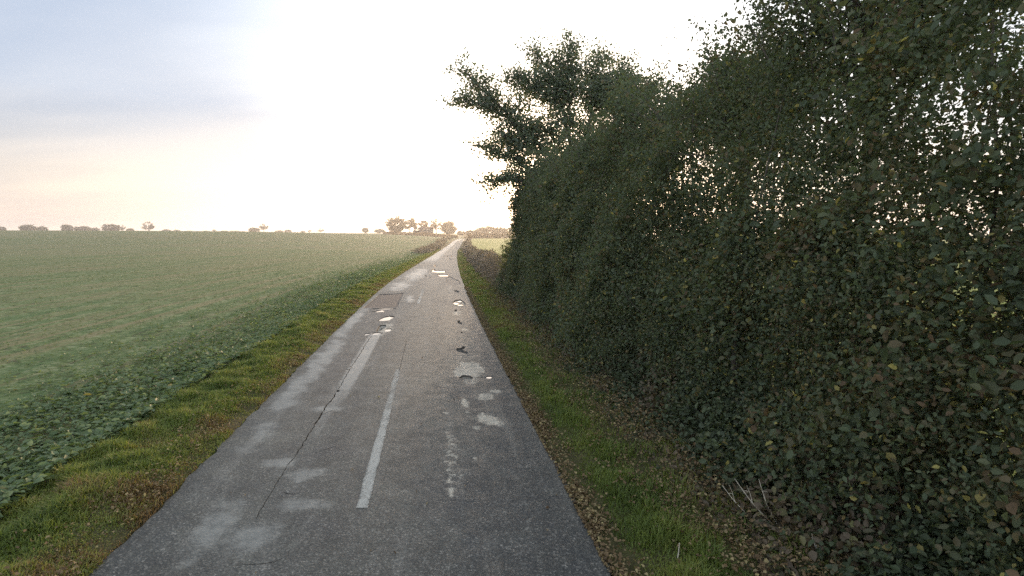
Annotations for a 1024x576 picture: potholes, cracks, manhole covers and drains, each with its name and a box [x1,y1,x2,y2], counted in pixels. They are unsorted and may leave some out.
crack [256,337,371,518]
